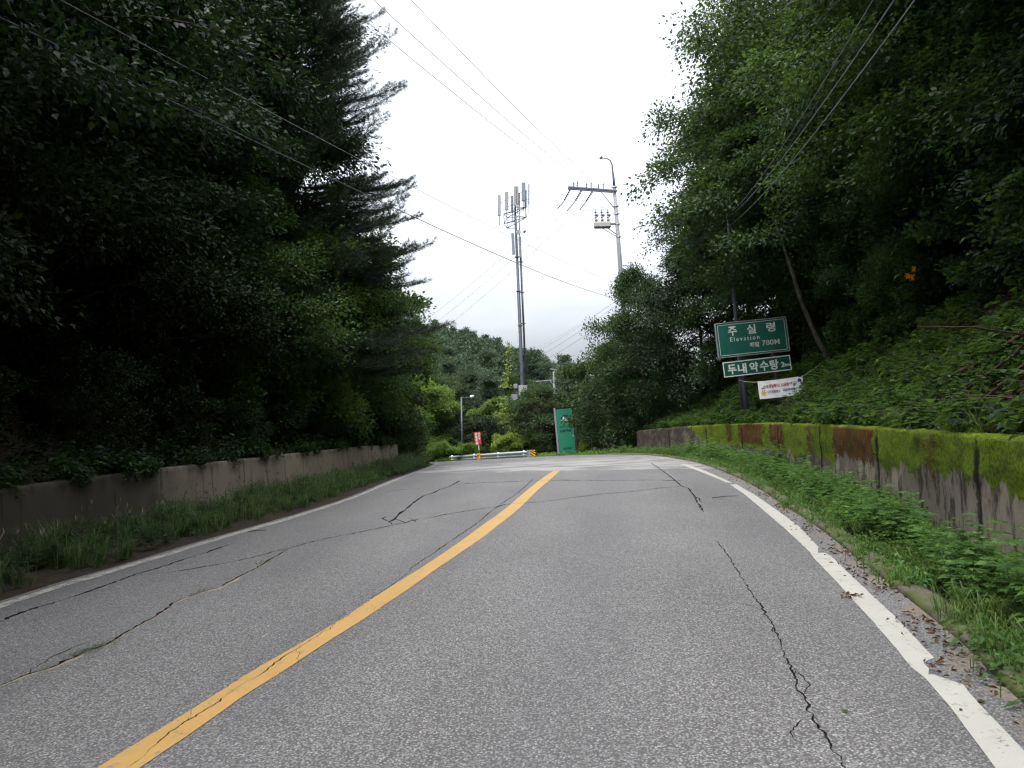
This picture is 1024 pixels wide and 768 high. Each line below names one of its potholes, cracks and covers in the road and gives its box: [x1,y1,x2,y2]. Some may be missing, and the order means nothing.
crack [717,541,846,768]
crack [0,463,704,744]
